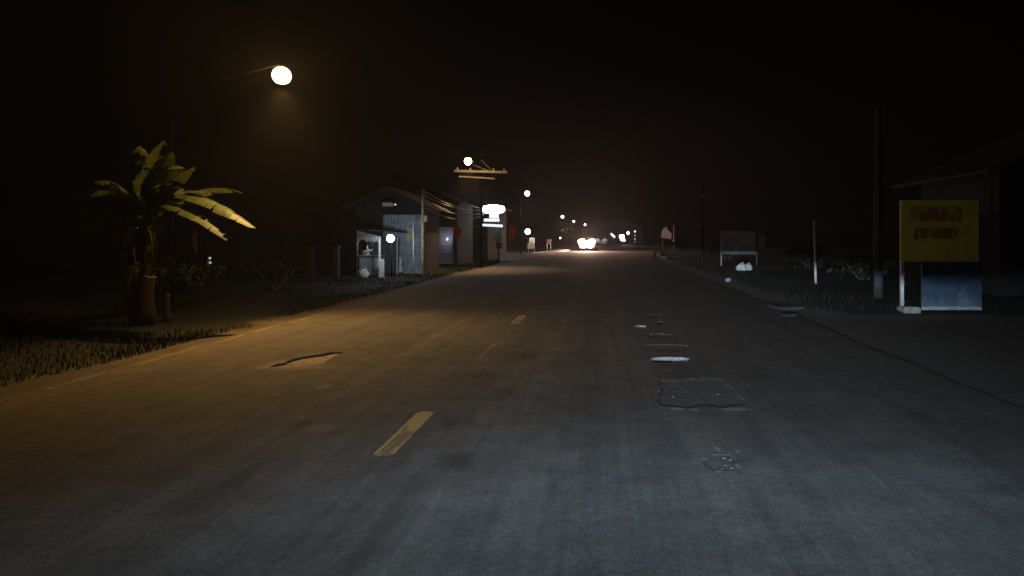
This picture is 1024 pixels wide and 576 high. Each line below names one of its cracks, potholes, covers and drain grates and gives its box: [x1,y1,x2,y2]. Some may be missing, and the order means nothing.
pothole [700,454,737,471]
pothole [656,378,748,408]
pothole [270,352,342,367]
